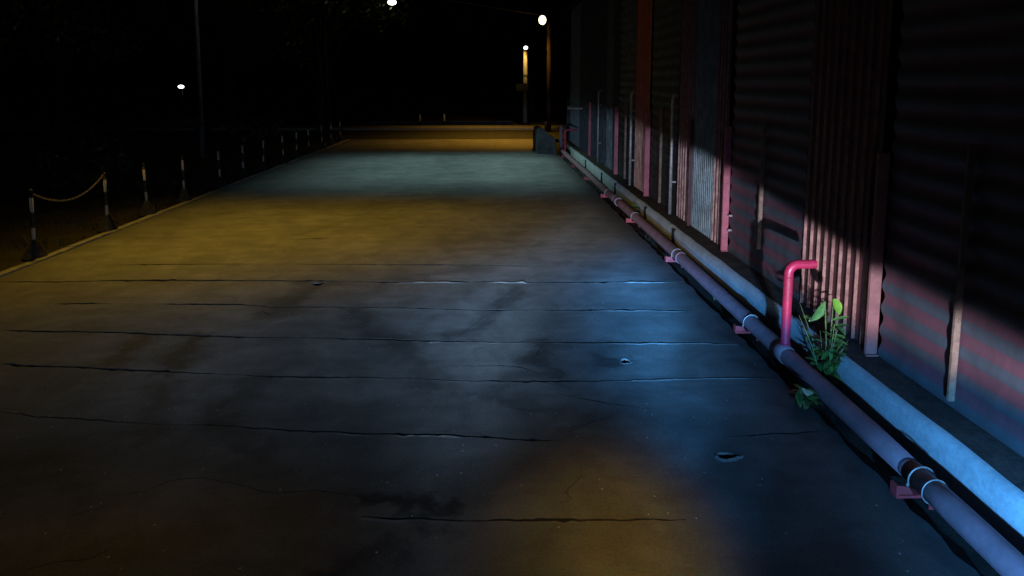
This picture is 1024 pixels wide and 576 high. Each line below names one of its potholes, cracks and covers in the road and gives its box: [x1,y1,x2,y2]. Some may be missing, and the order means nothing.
pothole [713,451,744,462]
crack [468,345,543,373]
crack [558,393,639,432]
crack [133,478,366,499]
crack [559,474,586,505]
